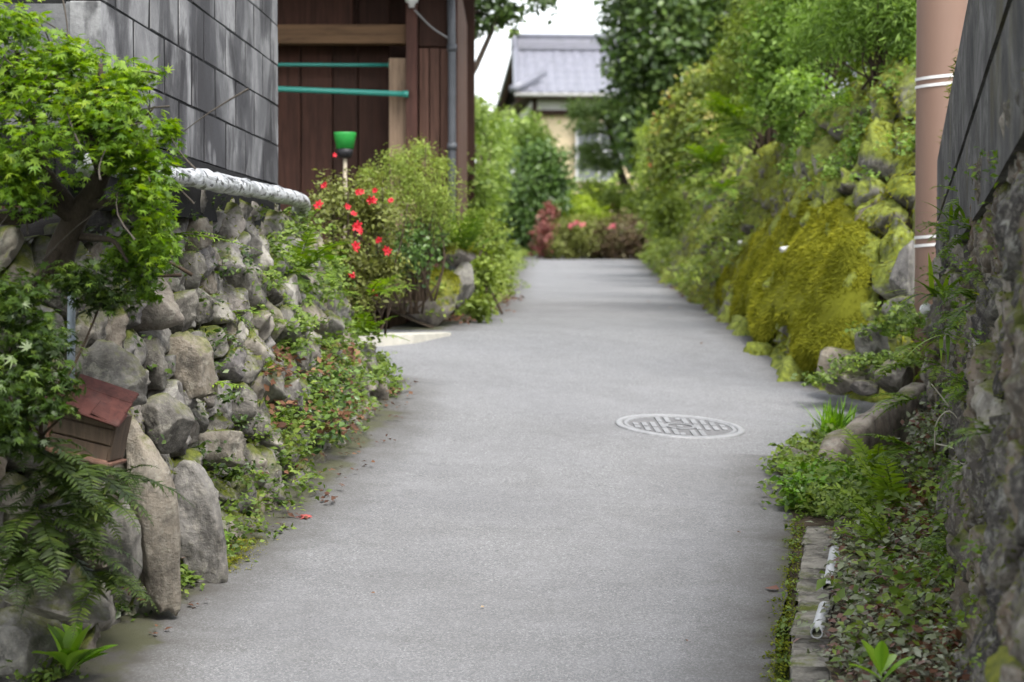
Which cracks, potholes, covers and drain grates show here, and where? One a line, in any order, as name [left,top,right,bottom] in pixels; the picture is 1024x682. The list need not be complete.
manhole cover [615,414,745,439]
